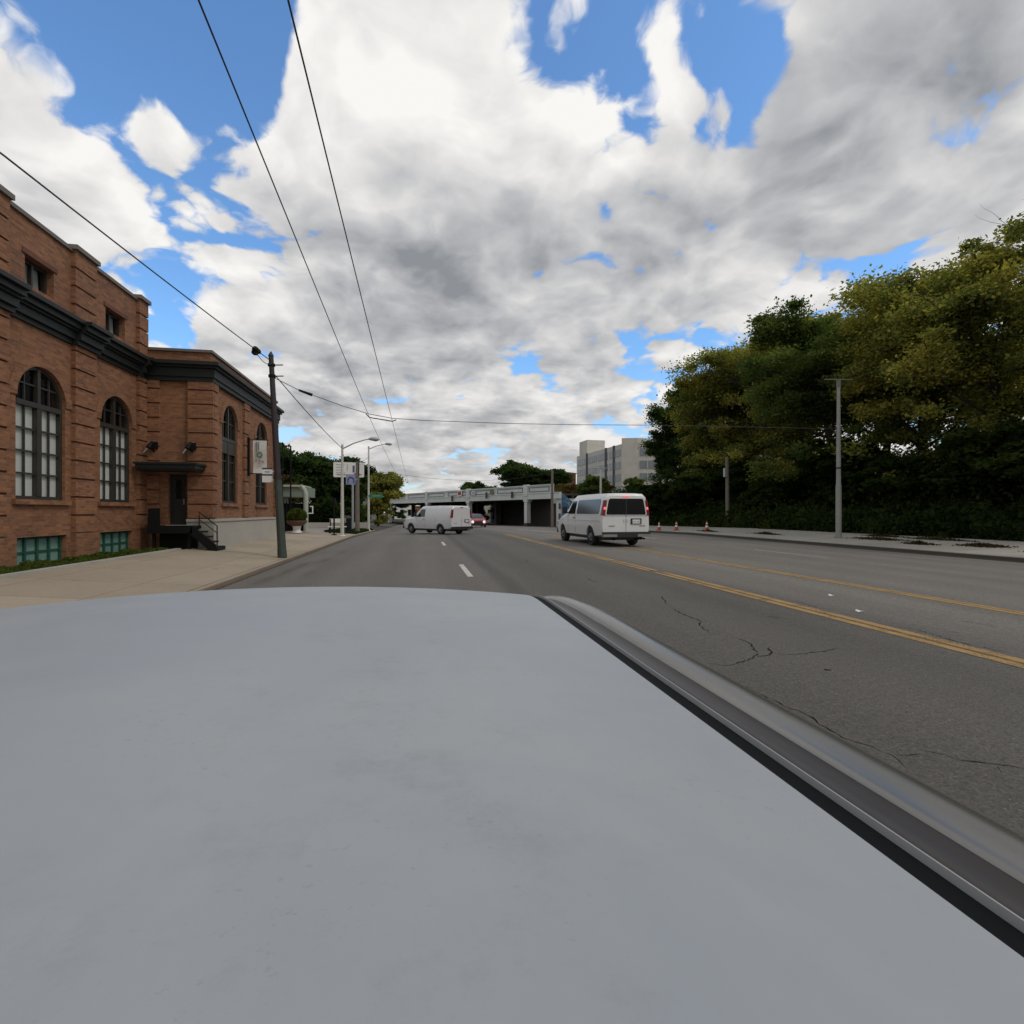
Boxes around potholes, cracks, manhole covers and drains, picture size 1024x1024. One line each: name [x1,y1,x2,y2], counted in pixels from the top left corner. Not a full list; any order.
crack [738,682,1024,772]
crack [661,597,834,666]
